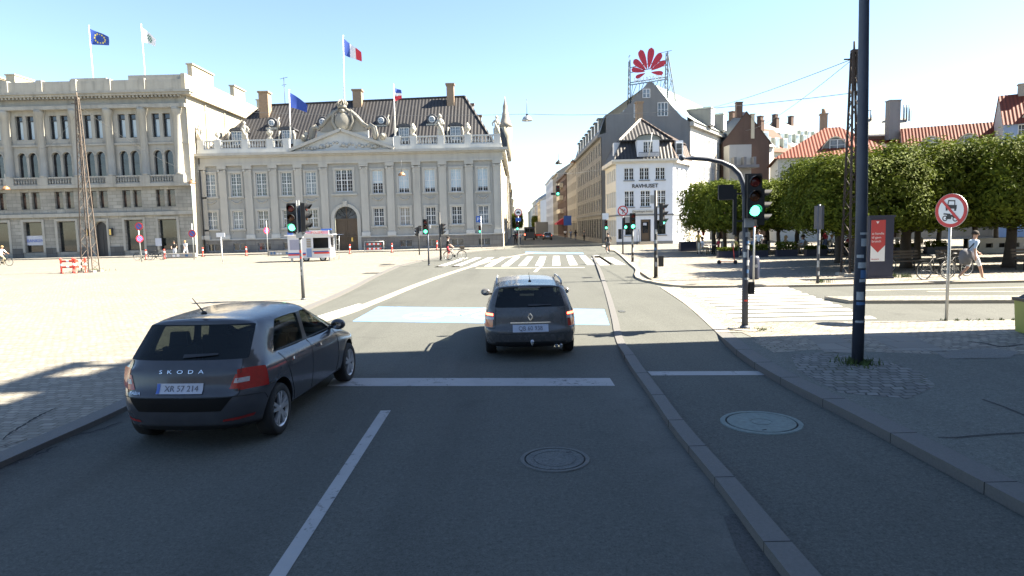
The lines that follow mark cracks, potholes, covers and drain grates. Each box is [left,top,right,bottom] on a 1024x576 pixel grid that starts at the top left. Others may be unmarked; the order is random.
manhole cover [720,411,804,435]
manhole cover [520,447,590,473]
